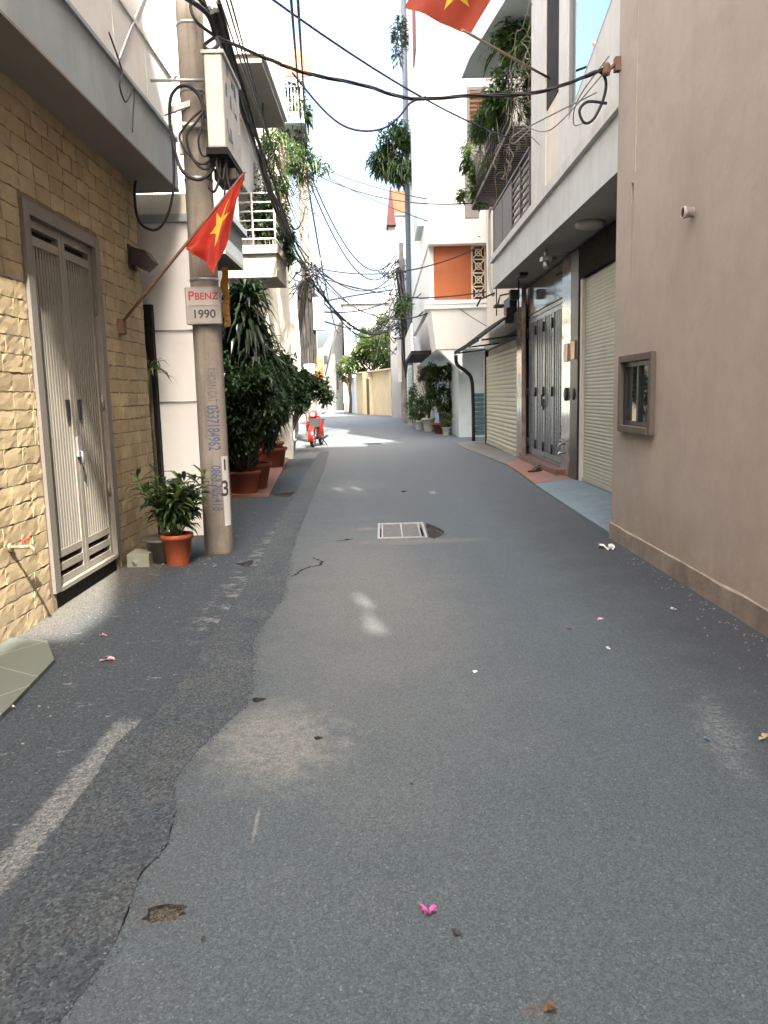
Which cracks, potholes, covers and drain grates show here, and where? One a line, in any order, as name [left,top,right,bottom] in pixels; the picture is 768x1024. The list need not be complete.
pothole [142,904,188,923]
drain grate [377,522,428,539]
pothole [426,523,444,539]
crack [292,558,324,577]
